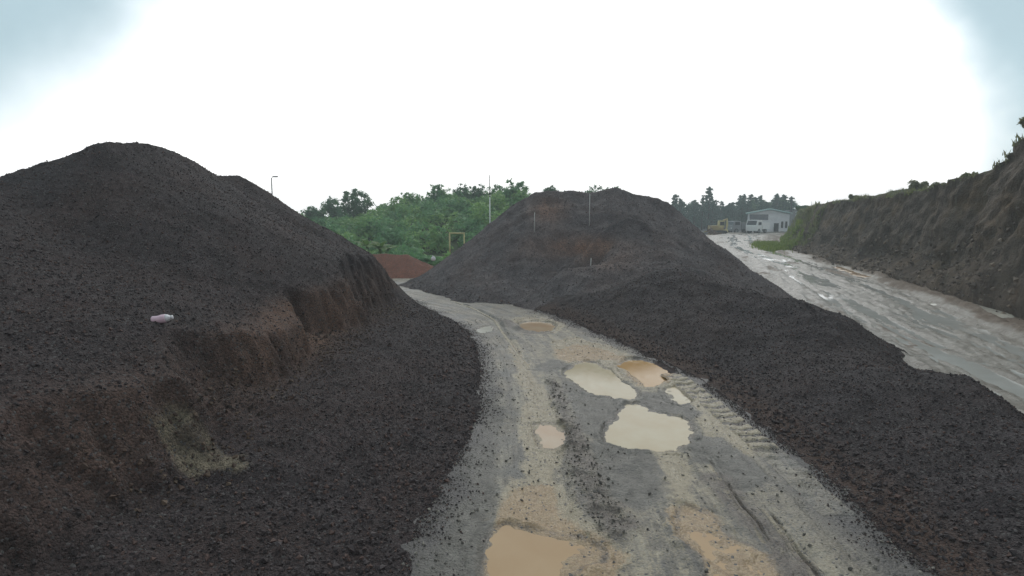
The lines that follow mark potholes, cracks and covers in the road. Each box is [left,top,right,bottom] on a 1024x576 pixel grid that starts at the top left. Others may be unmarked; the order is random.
pothole [609,355,688,390]
pothole [655,380,704,407]
pothole [524,417,576,455]
pothole [556,357,649,403]
pothole [593,399,705,456]
pothole [659,497,794,576]
pothole [464,515,625,576]
pothole [514,319,561,333]
